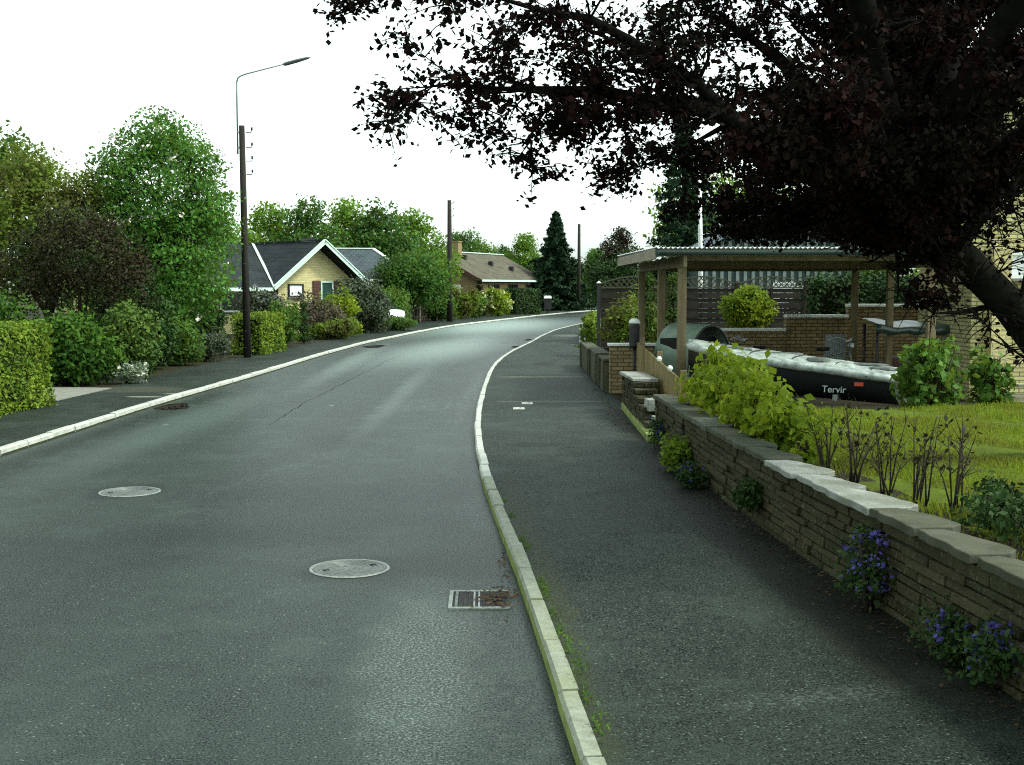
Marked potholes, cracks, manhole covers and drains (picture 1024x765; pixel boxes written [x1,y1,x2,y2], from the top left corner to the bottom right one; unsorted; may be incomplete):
manhole cover [309,559,390,578]
drain grate [448,590,510,609]
manhole cover [98,486,161,497]
